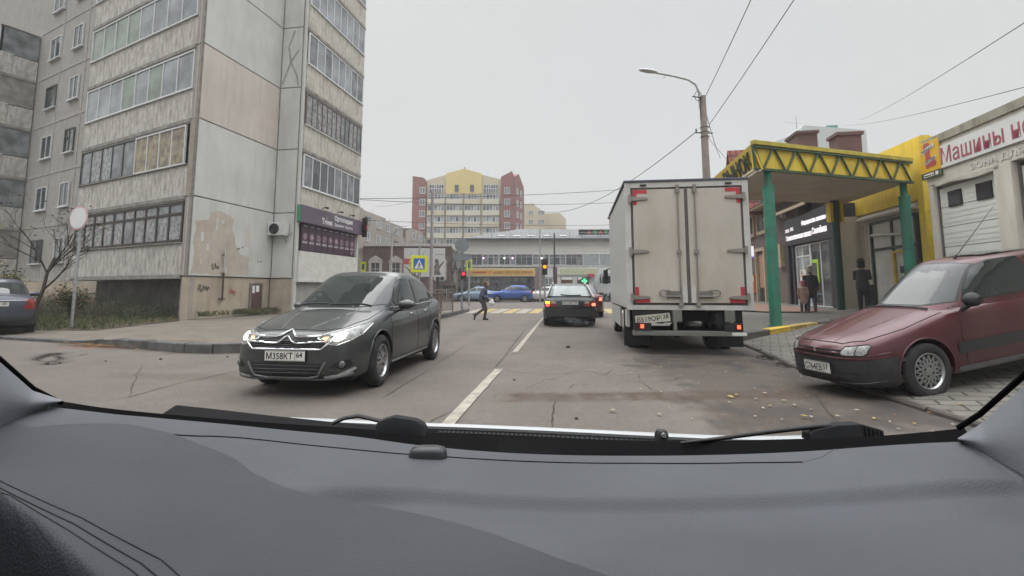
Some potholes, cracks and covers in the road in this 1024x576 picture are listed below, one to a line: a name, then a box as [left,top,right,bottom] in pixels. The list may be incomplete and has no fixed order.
crack [112,367,237,400]
pothole [32,353,63,362]
